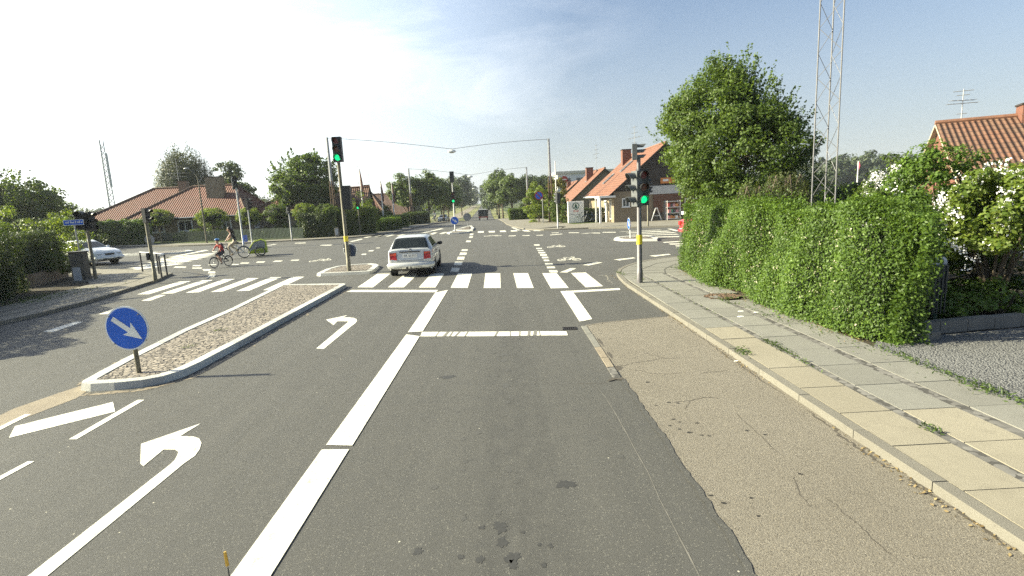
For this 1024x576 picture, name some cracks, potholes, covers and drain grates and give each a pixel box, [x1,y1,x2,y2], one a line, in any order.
crack [793,478,902,562]
crack [807,410,1005,546]
